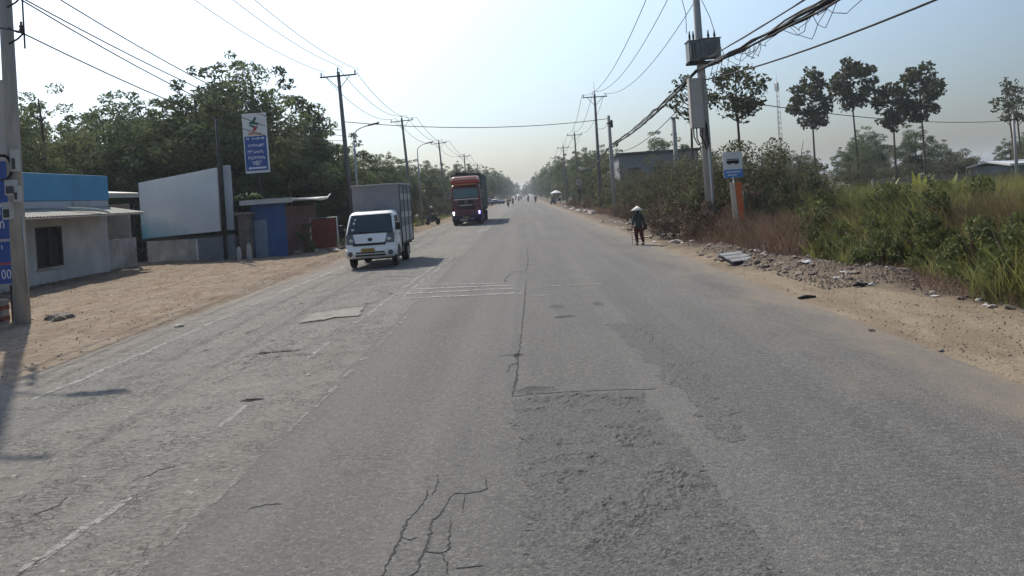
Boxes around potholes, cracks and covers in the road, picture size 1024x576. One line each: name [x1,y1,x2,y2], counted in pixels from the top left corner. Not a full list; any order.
crack [381,474,488,576]
crack [503,248,541,395]
